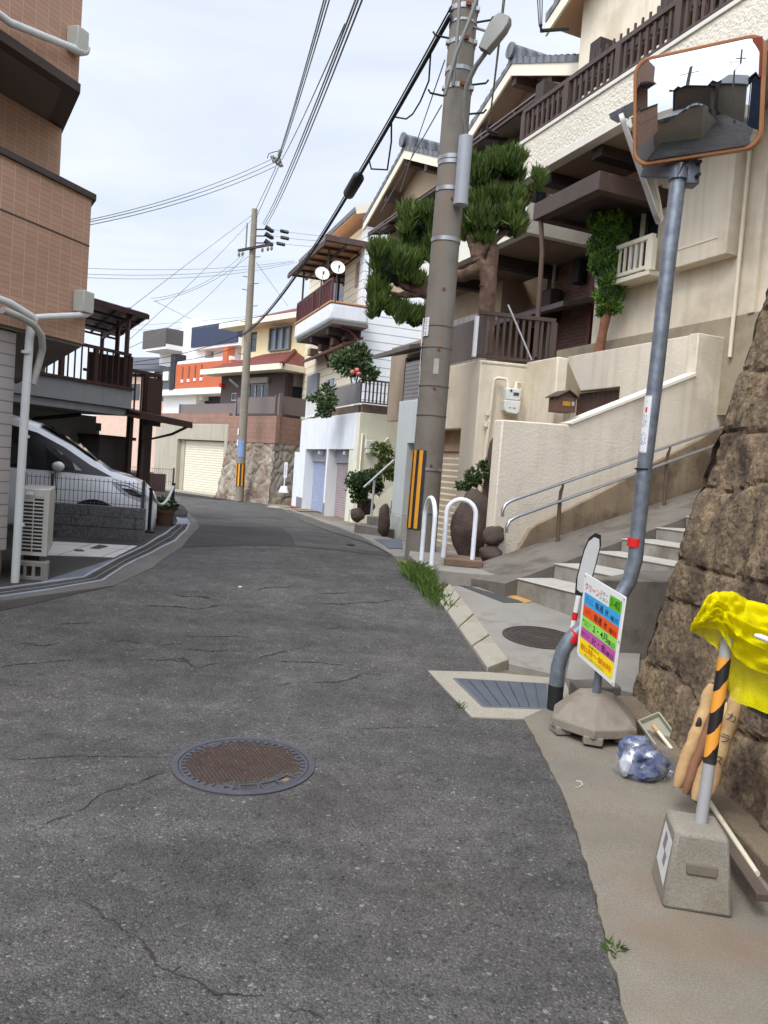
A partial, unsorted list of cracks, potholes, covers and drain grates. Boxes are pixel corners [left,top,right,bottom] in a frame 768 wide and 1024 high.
crack [3,642,76,667]
crack [120,635,379,685]
manhole cover [171,737,315,796]
drain grate [453,678,548,709]
crack [83,901,263,996]
manhole cover [502,626,576,650]
crack [7,755,168,824]
